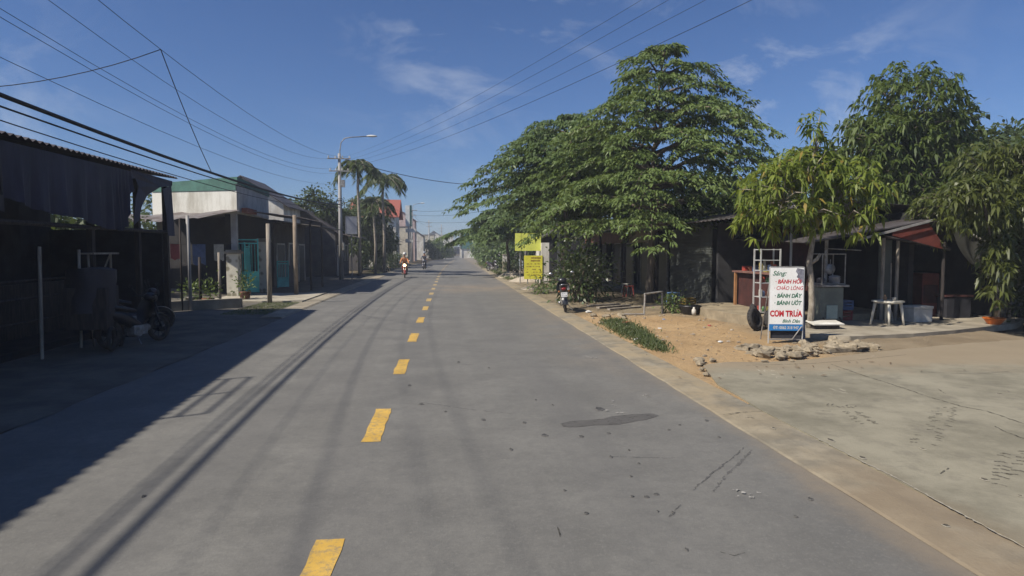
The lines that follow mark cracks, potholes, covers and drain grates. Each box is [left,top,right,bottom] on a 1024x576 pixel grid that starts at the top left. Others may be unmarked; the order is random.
crack [669,448,748,516]
